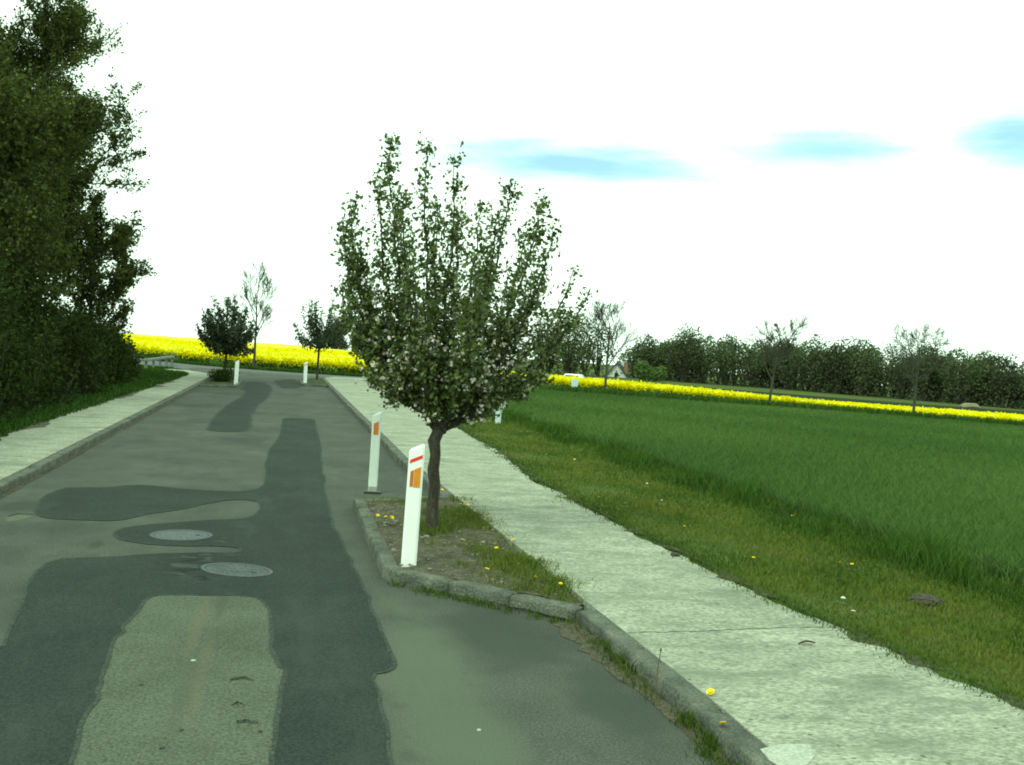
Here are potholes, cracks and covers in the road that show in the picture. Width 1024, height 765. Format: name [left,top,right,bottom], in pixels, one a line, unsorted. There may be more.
manhole cover [200,563,273,577]
manhole cover [150,530,213,541]
pothole [228,676,256,684]
pothole [235,719,262,728]
